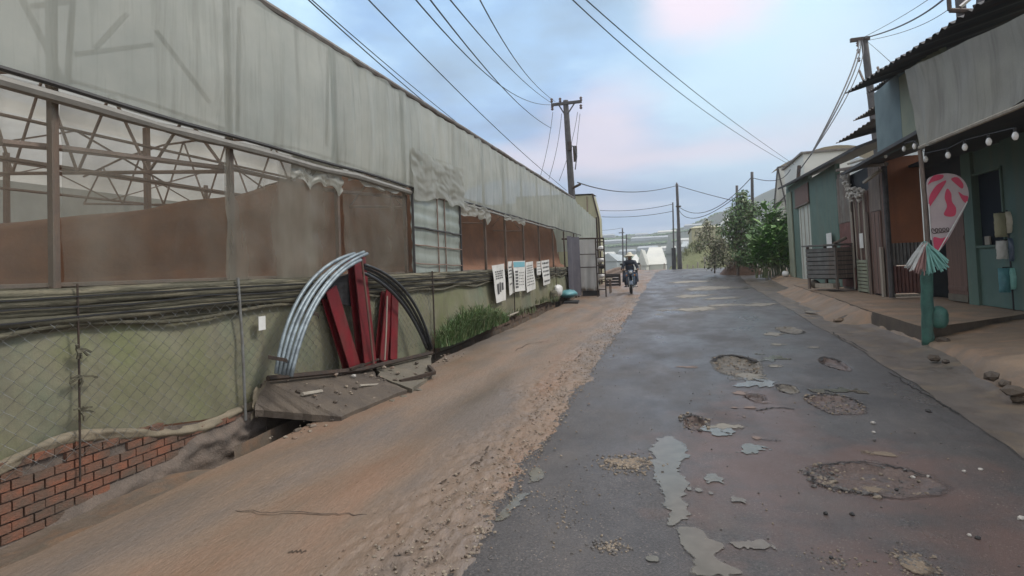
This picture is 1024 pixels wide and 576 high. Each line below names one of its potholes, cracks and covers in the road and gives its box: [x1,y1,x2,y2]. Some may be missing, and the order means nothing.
pothole [805,460,952,499]
pothole [776,384,799,394]
pothole [805,394,866,415]
pothole [683,415,706,430]
pothole [710,354,763,377]
pothole [819,357,852,371]
